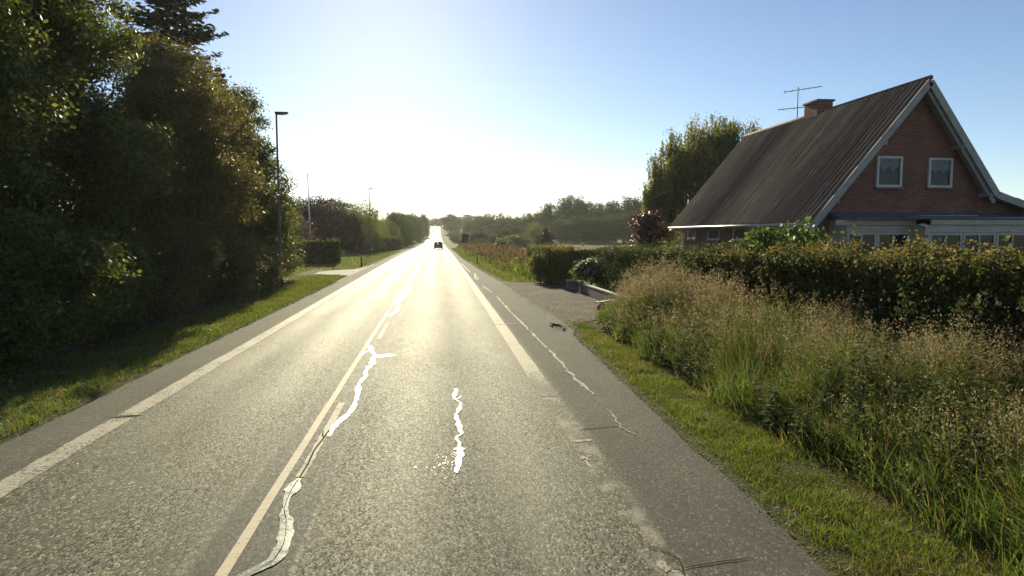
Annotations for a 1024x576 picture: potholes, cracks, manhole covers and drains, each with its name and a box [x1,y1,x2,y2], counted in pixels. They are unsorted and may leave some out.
crack [461,263,635,435]
crack [236,346,395,576]
crack [415,388,465,473]
crack [623,545,748,575]
